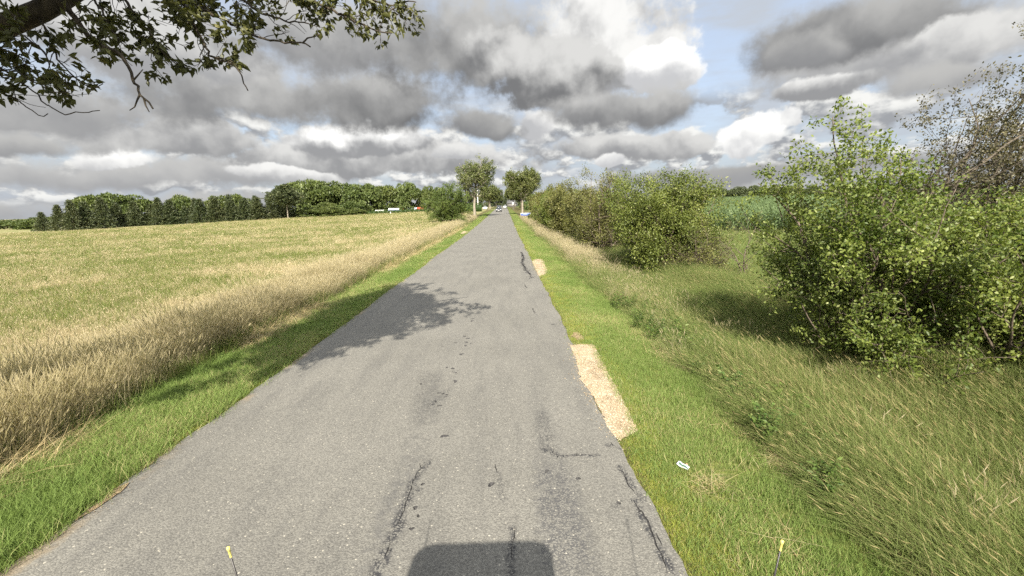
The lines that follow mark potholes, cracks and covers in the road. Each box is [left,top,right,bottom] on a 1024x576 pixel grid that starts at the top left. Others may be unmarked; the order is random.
crack [396,464,425,526]
crack [520,251,535,288]
crack [620,468,667,569]
